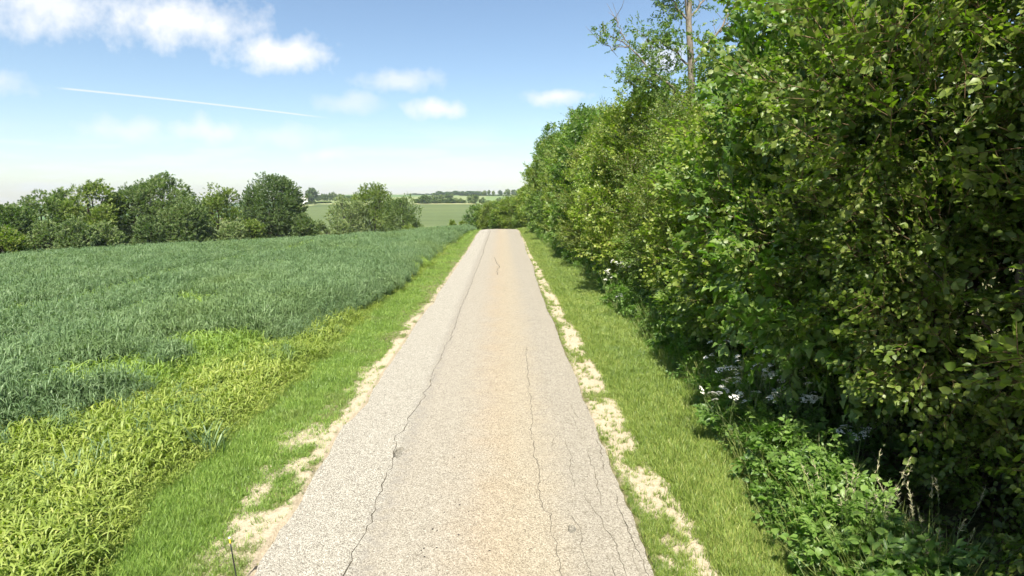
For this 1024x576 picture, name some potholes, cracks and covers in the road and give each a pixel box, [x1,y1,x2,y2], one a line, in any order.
crack [343,241,500,576]
crack [526,349,649,576]
